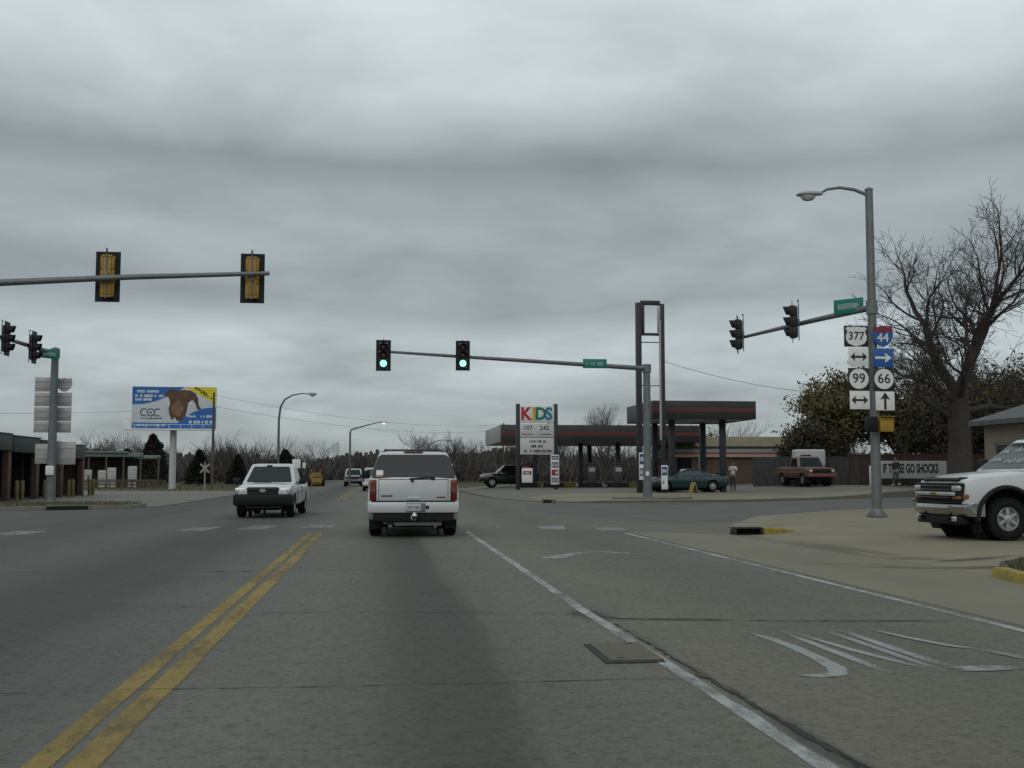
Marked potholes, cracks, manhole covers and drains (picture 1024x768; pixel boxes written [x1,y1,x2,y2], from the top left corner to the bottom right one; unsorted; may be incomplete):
drain grate [730,526,763,535]
manhole cover [584,642,666,664]
